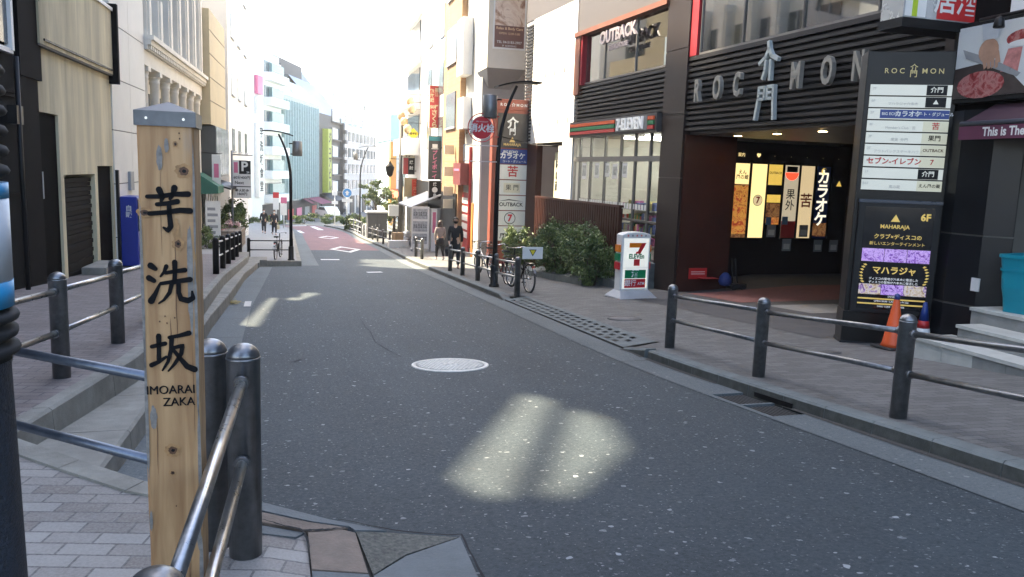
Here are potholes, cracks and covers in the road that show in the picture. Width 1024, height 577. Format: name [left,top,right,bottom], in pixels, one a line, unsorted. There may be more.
manhole cover [411,358,489,372]
drain grate [705,392,806,418]
